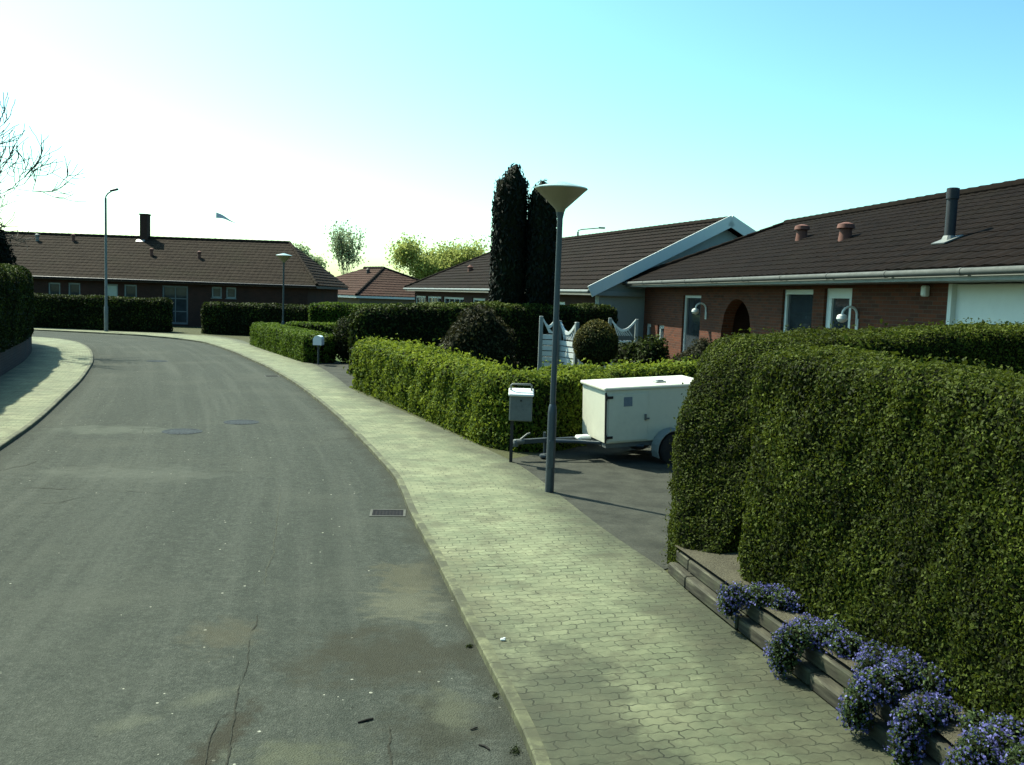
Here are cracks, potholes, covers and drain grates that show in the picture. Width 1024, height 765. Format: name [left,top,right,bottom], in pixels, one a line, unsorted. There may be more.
drain grate [369,509,406,517]
crack [204,615,258,765]
